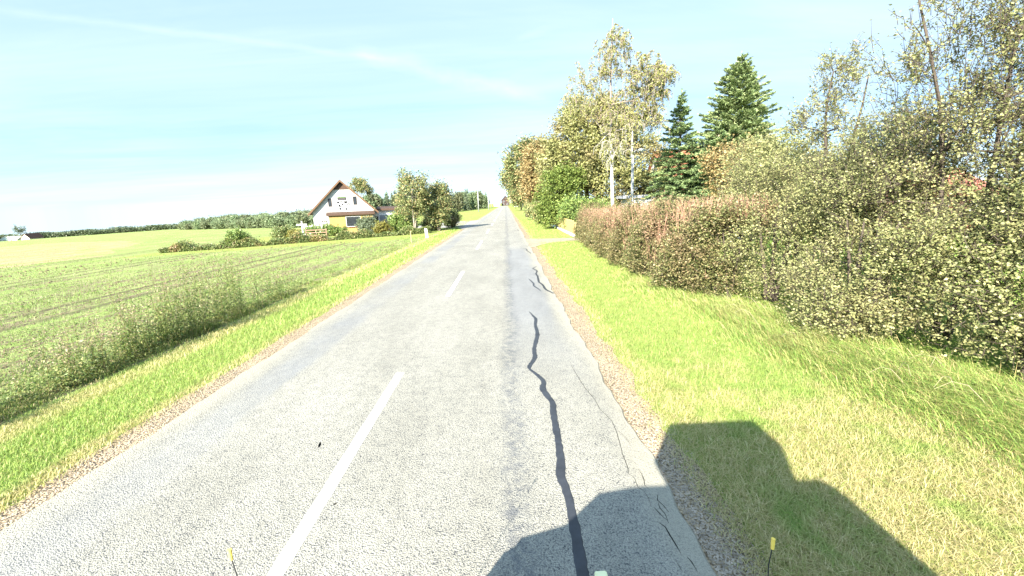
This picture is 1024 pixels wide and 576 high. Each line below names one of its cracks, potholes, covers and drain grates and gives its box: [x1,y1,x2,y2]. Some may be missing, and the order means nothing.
crack [571,365,697,572]
